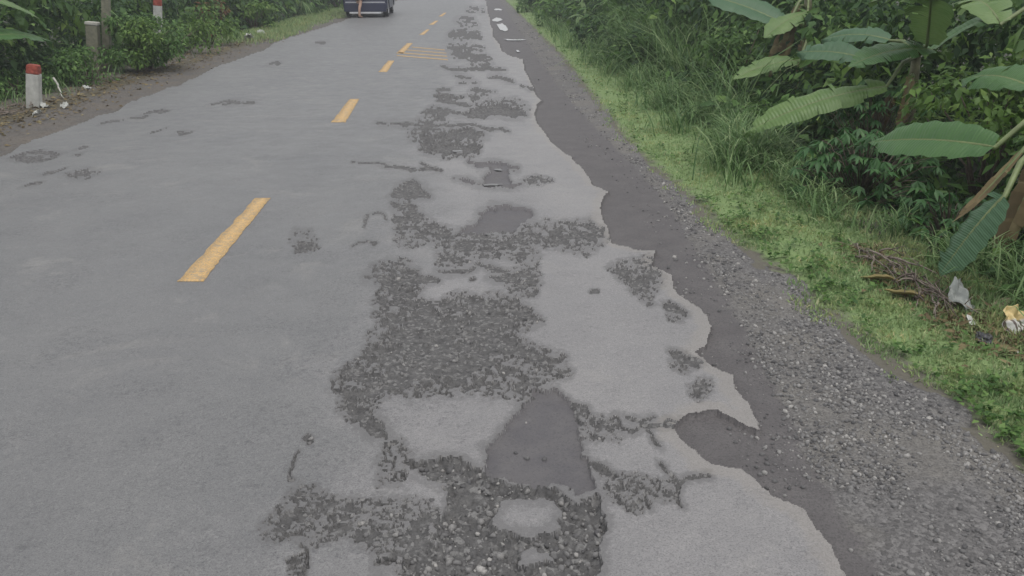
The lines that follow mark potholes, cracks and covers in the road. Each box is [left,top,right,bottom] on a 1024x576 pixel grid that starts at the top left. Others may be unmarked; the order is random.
pothole [373,476,609,576]
pothole [418,126,484,160]
pothole [453,158,522,189]
pothole [485,387,596,495]
pothole [463,97,531,120]
pothole [689,377,713,403]
pothole [433,92,464,100]
pothole [420,104,471,119]
pothole [285,542,309,576]
pothole [330,274,571,410]
